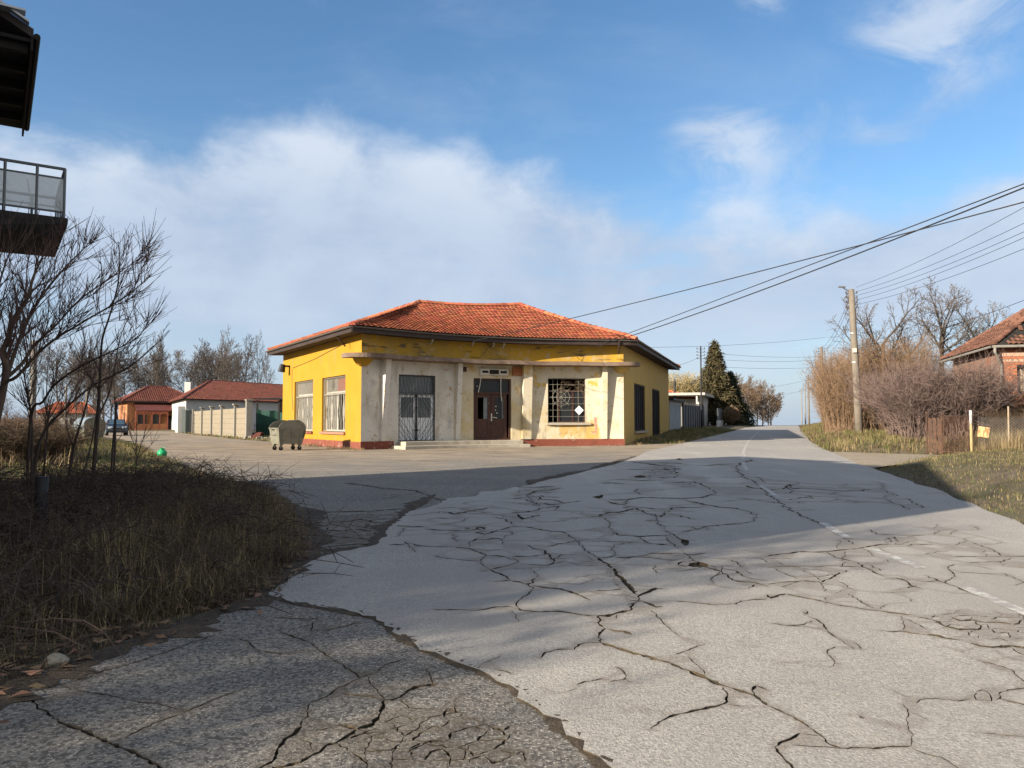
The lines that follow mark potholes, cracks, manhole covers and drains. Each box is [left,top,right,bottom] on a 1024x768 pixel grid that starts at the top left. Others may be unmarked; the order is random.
crack [238,617,526,768]
crack [31,635,234,768]
crack [320,460,1024,768]
